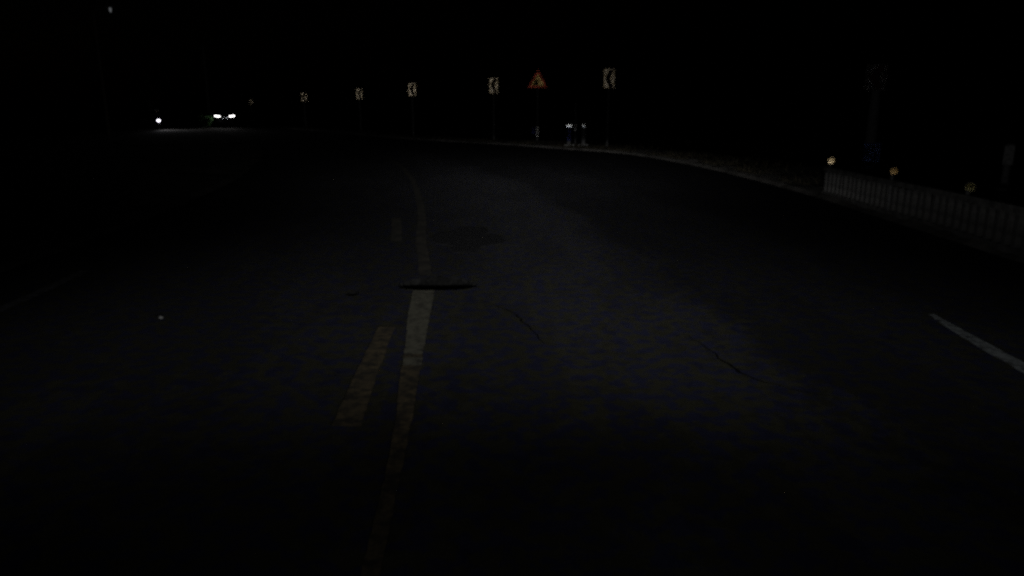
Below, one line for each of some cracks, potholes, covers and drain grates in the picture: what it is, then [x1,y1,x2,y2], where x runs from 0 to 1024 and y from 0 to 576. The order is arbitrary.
crack [482,300,543,342]
pothole [395,276,477,290]
crack [686,334,838,397]
